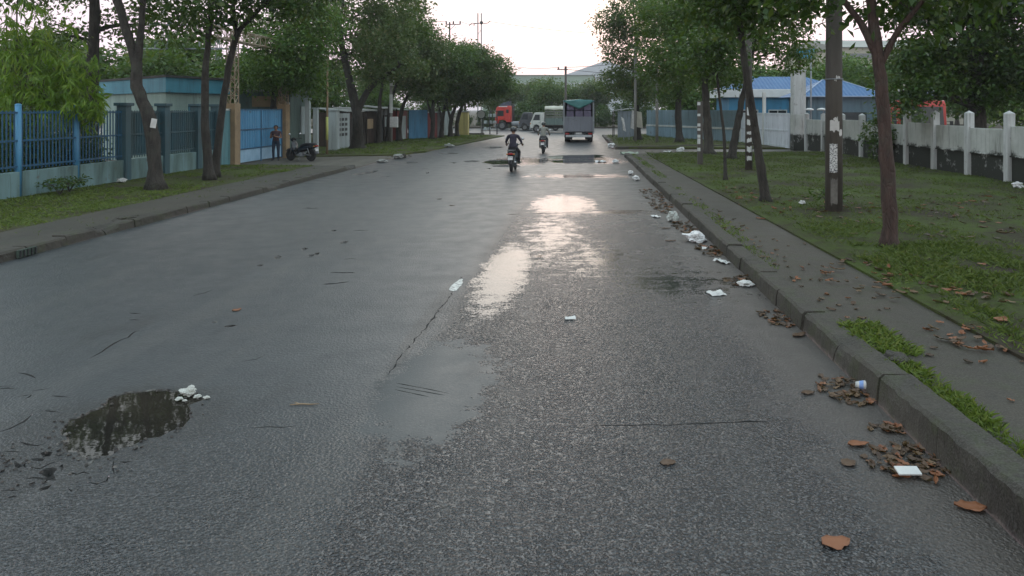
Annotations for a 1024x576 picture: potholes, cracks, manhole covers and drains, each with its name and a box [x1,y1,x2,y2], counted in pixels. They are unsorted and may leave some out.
pothole [61,389,208,462]
crack [83,313,140,365]
crack [0,373,131,498]
drain grate [16,246,37,259]
